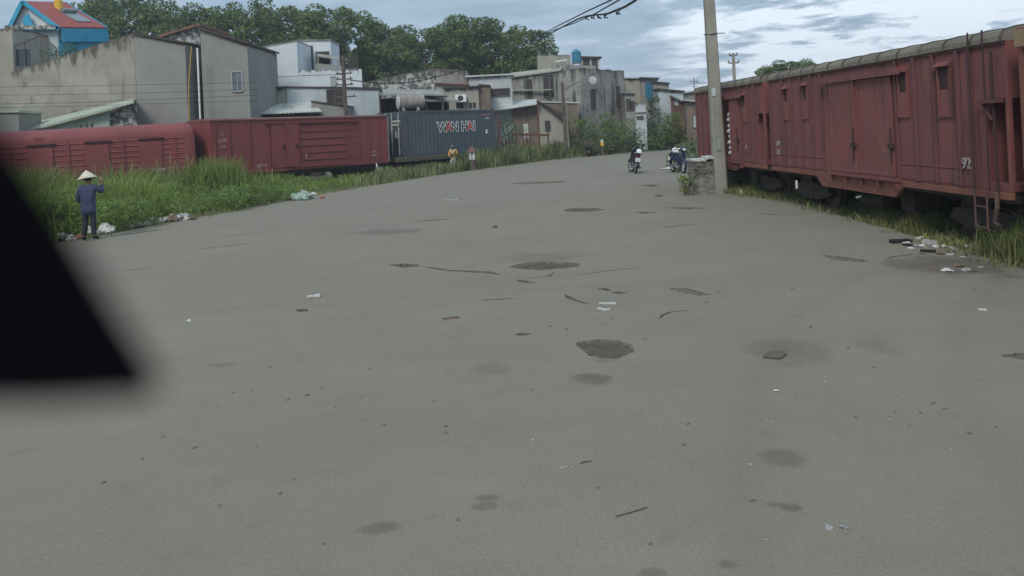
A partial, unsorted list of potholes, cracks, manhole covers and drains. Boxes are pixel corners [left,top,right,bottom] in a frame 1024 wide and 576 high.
pothole [576,339,635,359]
crack [422,266,500,275]
pothole [509,261,580,270]
